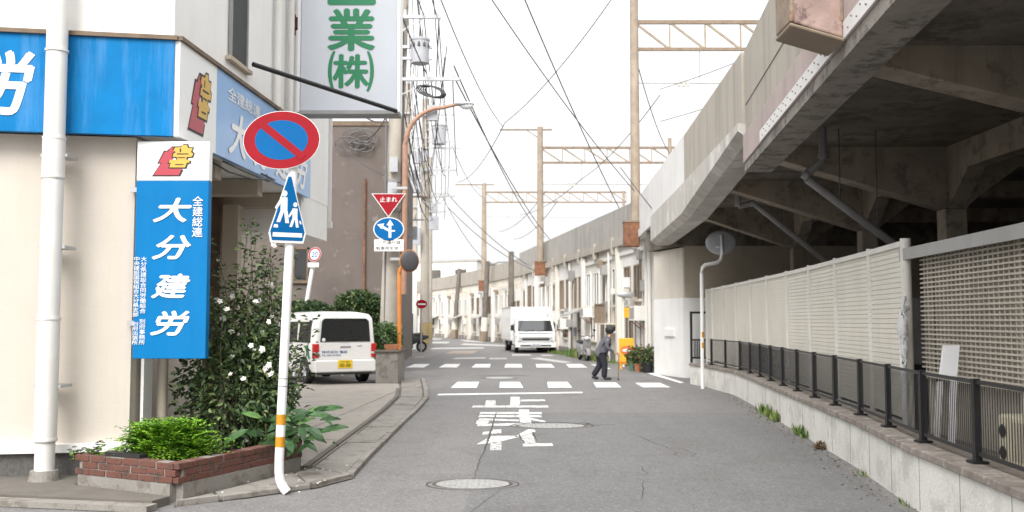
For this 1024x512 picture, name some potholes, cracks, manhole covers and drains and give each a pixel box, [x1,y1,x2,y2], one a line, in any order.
crack [627,432,697,500]
manhole cover [425,478,519,490]
